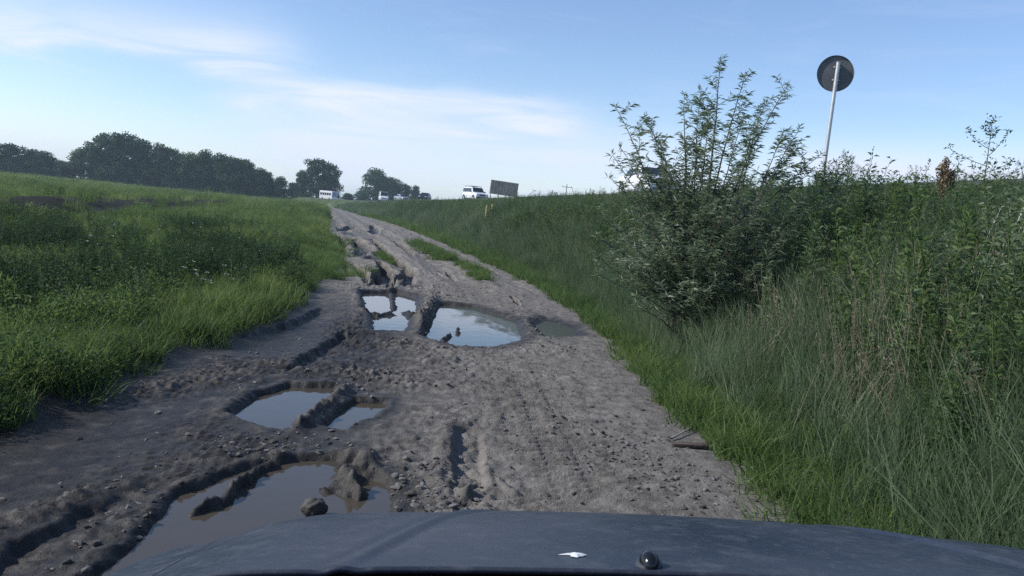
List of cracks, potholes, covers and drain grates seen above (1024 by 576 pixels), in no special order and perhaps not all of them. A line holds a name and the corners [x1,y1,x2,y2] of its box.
pothole [414,296,532,348]
pothole [216,379,350,432]
pothole [311,393,397,432]
pothole [521,314,596,338]
pothole [354,287,428,331]
pothole [65,447,410,576]
